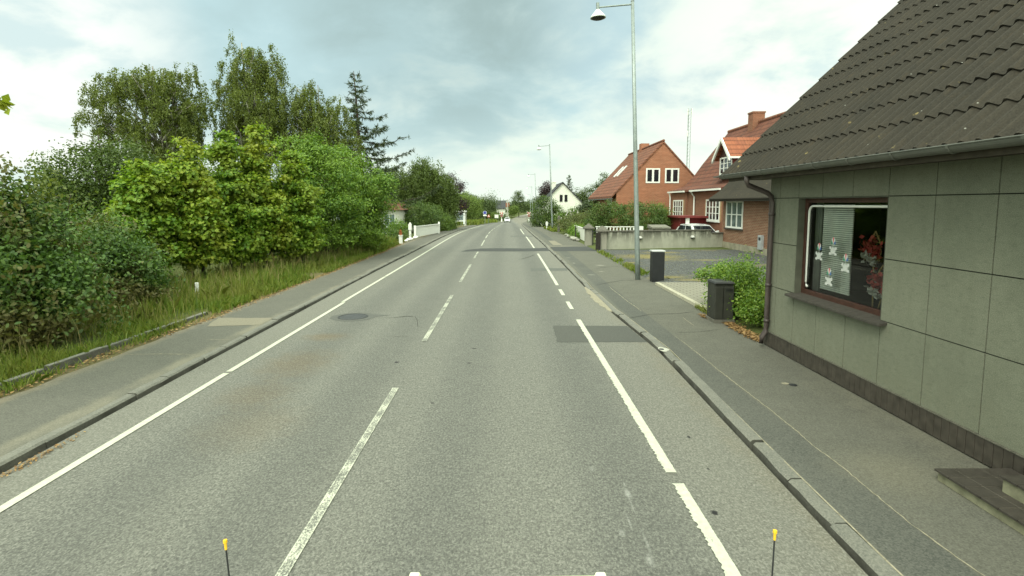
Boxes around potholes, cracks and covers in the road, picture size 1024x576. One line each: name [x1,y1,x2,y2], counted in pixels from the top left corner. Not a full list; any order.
manhole cover [330,313,386,321]
